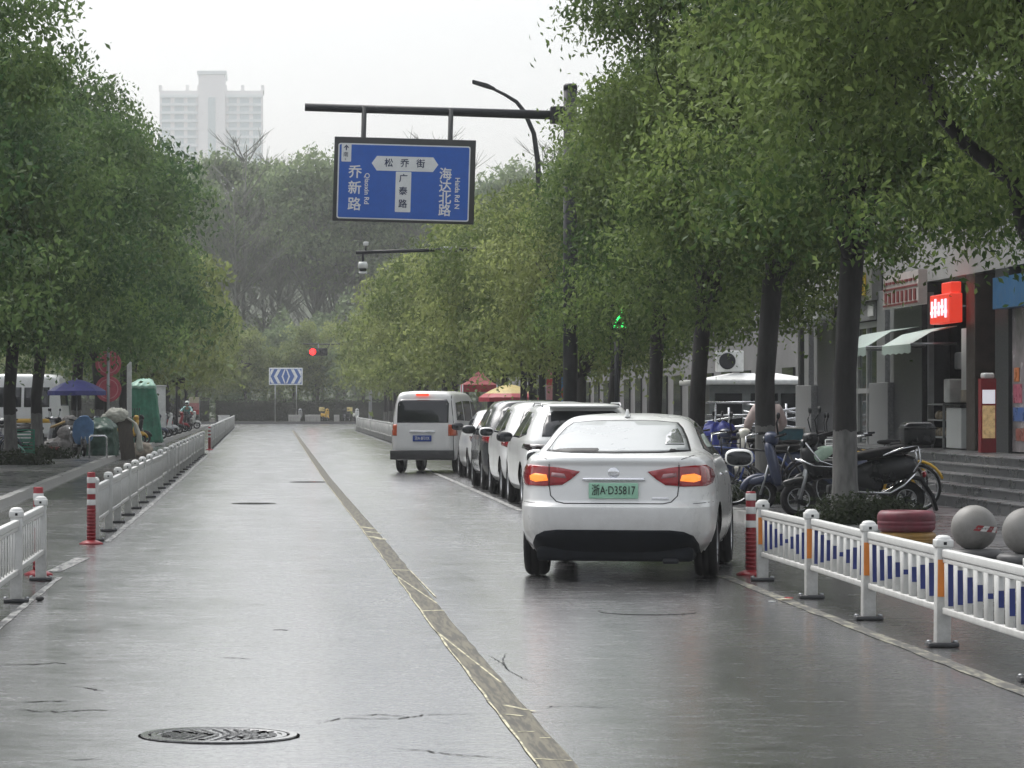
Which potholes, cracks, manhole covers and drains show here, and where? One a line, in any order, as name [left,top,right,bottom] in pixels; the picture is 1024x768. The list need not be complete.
crack [316,706,607,723]
manhole cover [138,726,300,744]
crack [24,686,104,712]
